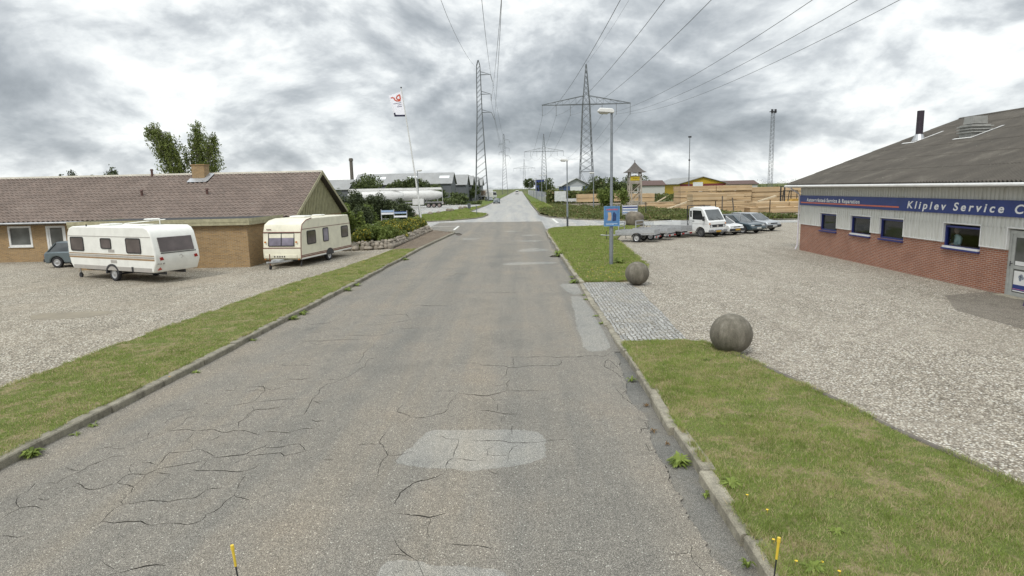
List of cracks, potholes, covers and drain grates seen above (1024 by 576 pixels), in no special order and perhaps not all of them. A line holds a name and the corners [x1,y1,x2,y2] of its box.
crack [1,386,309,533]
crack [393,356,671,576]
